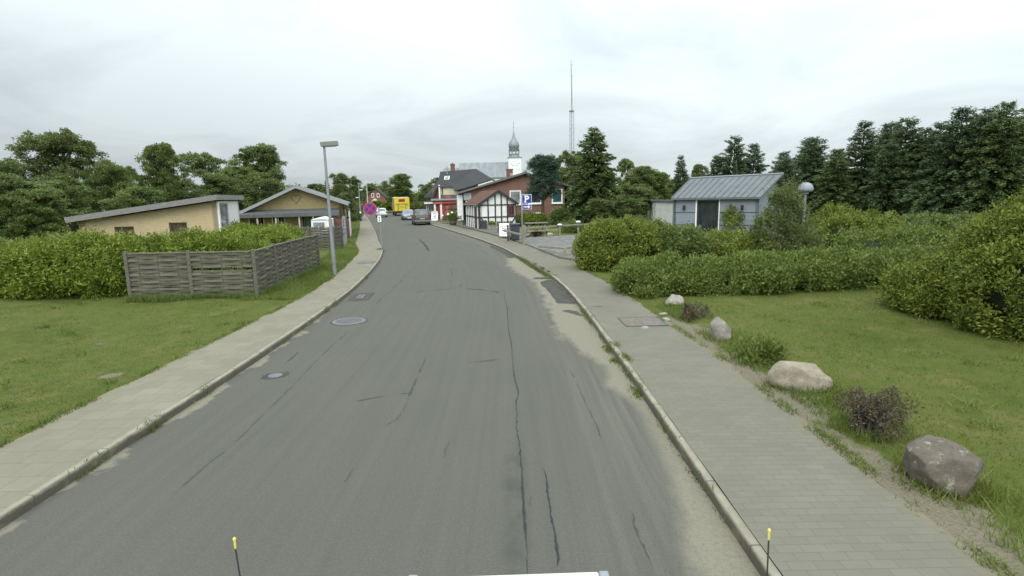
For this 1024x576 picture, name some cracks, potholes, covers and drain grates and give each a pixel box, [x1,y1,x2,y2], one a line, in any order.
crack [416,269,531,574]
utility cover [617,316,669,327]
manhole cover [330,317,368,325]
crack [358,360,425,423]
crack [632,513,651,564]
utility cover [260,371,289,379]
